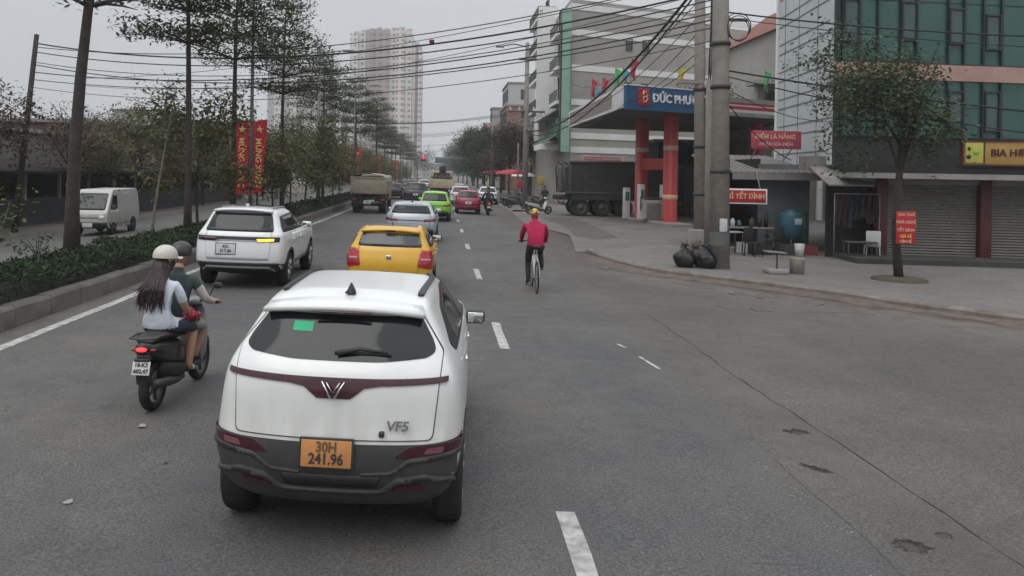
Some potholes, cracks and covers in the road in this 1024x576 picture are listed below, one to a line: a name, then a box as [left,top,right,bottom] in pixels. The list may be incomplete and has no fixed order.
pothole [890,538,935,554]
pothole [799,463,835,474]
